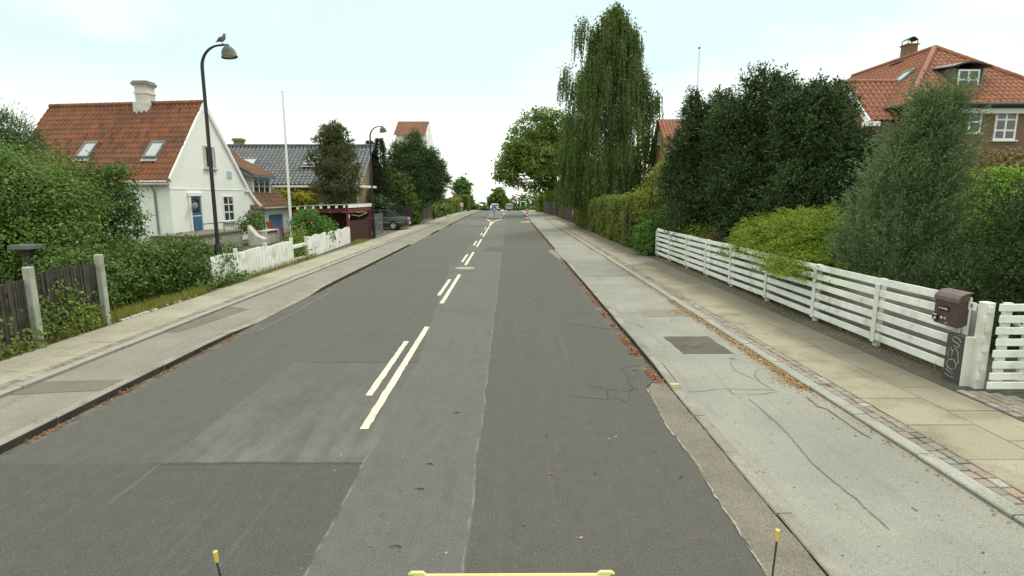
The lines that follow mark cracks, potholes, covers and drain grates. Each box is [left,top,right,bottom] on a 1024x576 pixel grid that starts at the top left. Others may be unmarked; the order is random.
crack [578,365,652,405]
crack [692,353,889,529]
